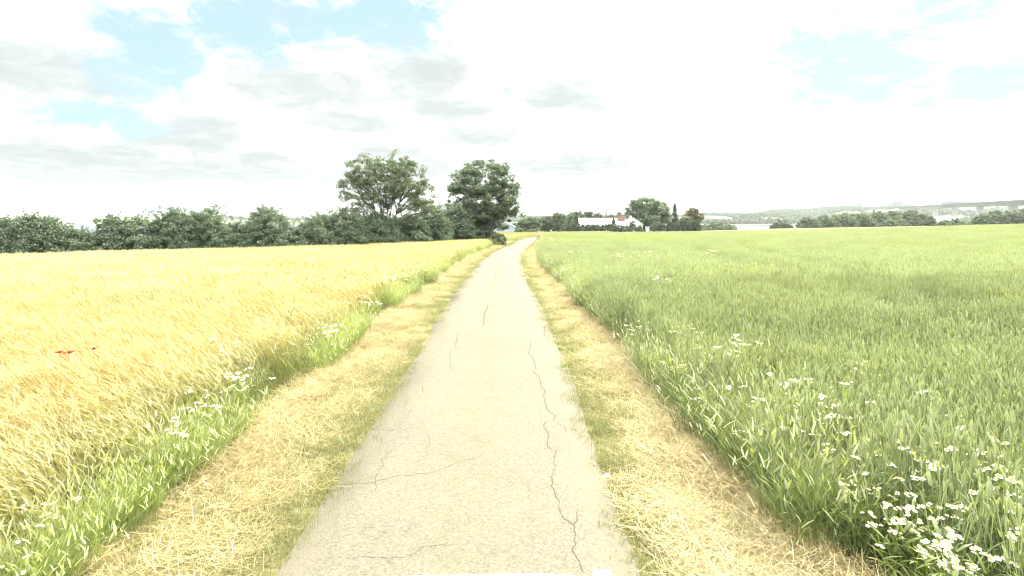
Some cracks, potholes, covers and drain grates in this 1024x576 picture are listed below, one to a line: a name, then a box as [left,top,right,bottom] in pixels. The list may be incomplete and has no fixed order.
crack [504,341,584,573]
crack [353,421,478,490]
